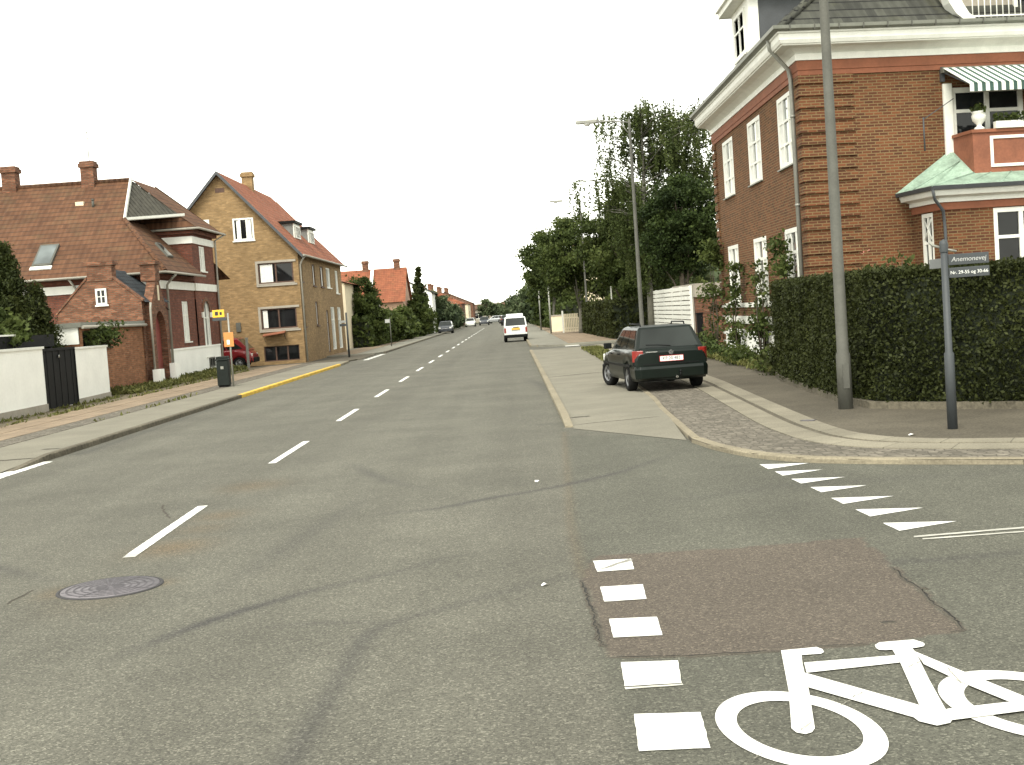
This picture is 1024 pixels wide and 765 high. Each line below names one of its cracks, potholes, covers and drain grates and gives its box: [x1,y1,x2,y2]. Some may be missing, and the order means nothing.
manhole cover [55,576,164,600]
crack [881,566,967,633]
